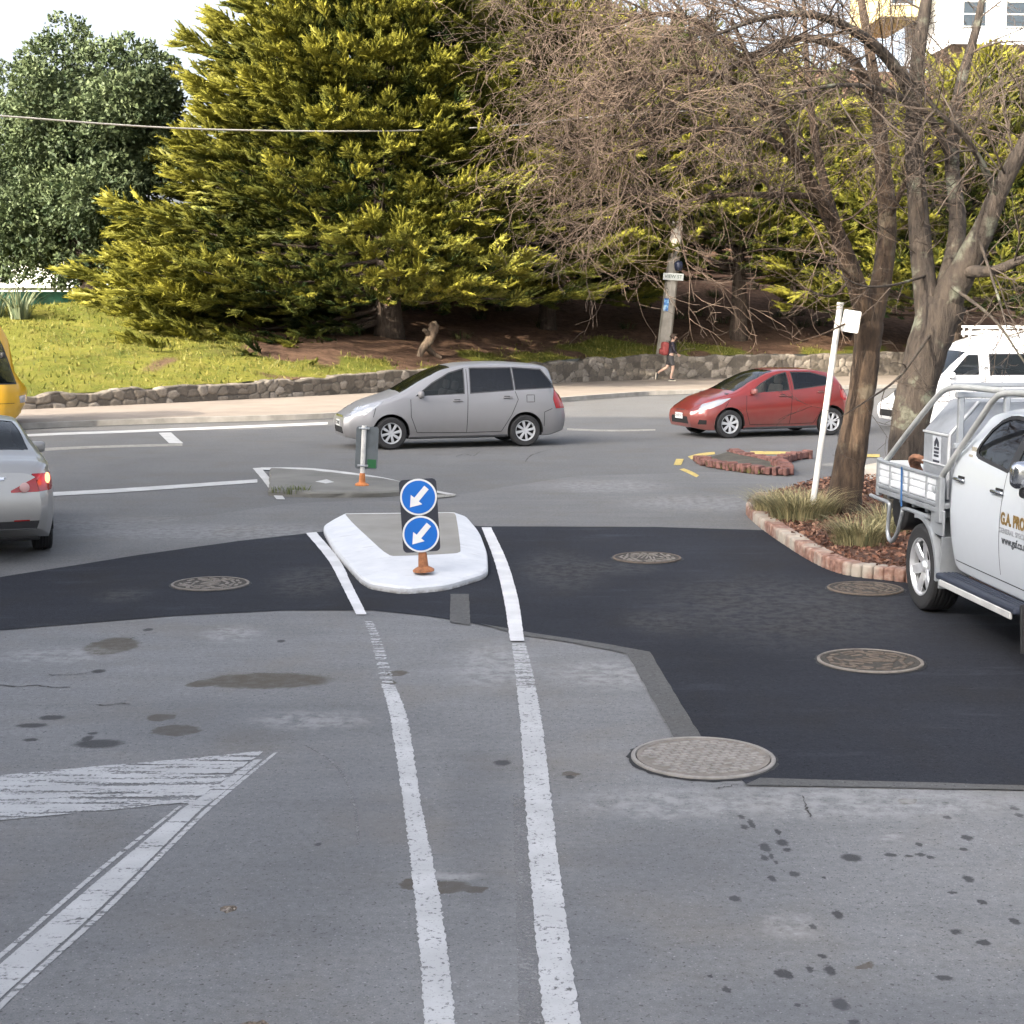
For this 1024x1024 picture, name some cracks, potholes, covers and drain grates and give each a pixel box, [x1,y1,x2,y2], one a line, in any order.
manhole cover [611,552,684,564]
manhole cover [626,736,779,782]
manhole cover [169,576,252,592]
manhole cover [814,648,927,674]
manhole cover [825,581,907,596]
